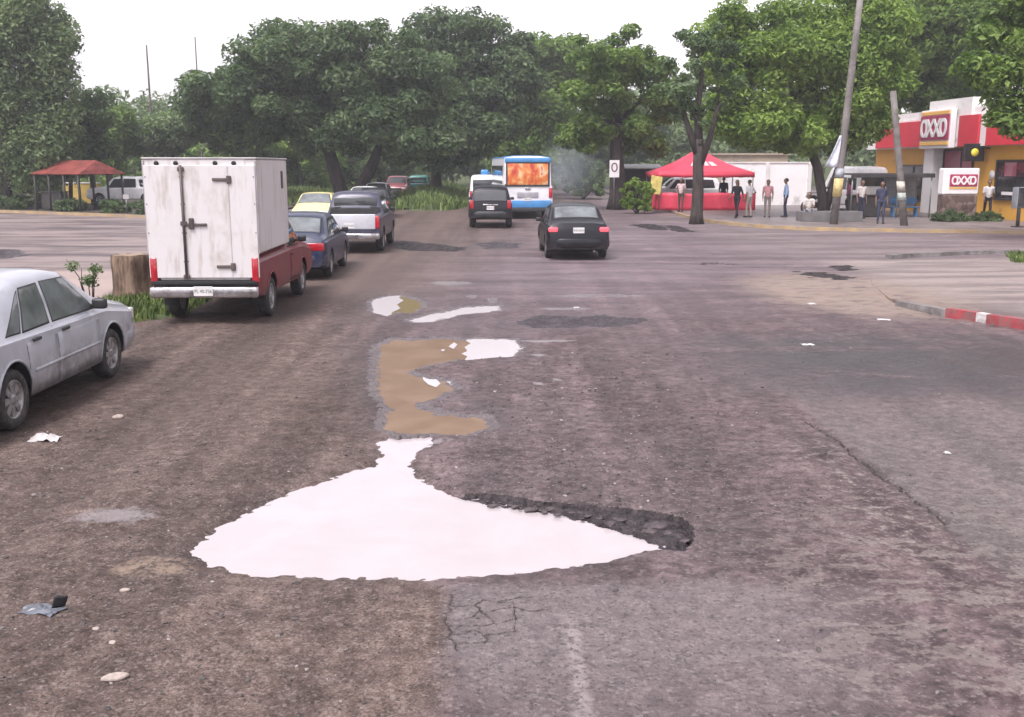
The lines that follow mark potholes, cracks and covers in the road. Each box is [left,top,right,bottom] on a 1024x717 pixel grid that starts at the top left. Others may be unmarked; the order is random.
pothole [182,436,695,581]
pothole [365,336,526,440]
pothole [366,294,428,316]
pothole [403,304,507,322]
crack [805,421,946,525]
crack [444,595,543,651]
